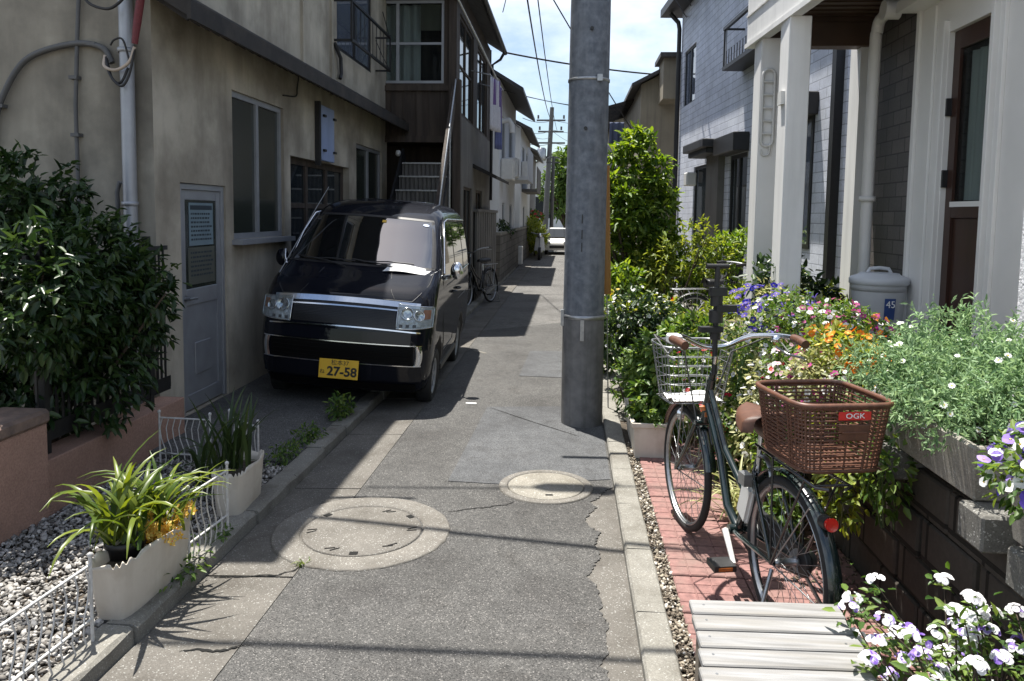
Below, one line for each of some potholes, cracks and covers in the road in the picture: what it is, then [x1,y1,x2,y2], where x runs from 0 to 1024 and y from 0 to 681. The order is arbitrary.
manhole cover [271,497,451,572]
crack [181,644,251,652]
manhole cover [499,470,593,505]
crack [210,566,300,578]
